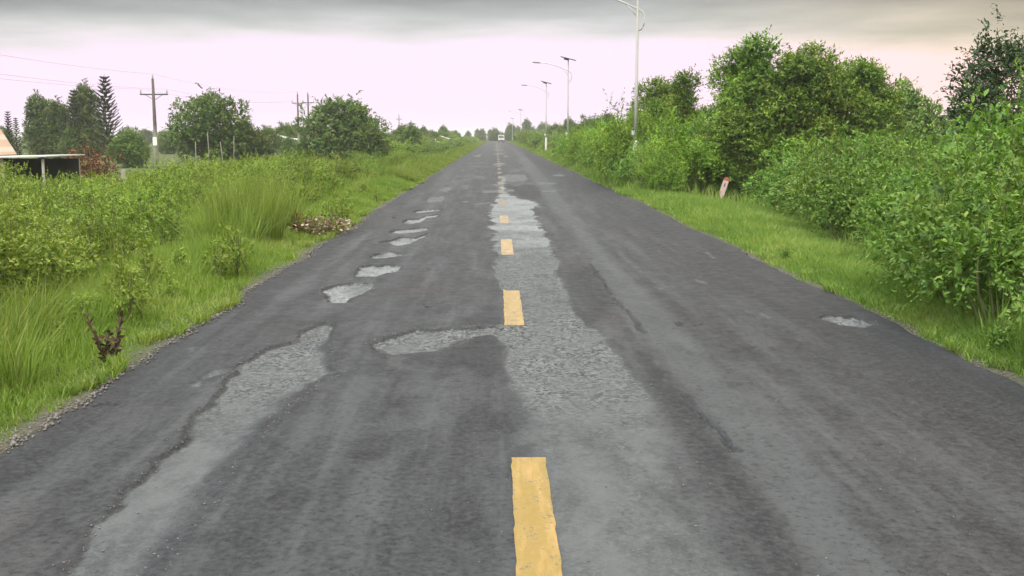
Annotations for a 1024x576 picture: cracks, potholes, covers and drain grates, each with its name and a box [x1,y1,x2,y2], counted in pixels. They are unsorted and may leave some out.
pothole [369,251,408,259]
pothole [320,282,377,303]
pothole [353,264,402,277]
pothole [369,326,520,356]
pothole [817,314,878,327]
pothole [401,214,440,224]
pothole [380,233,429,246]
crack [590,264,649,333]
crack [680,395,745,453]
pothole [58,322,340,576]
